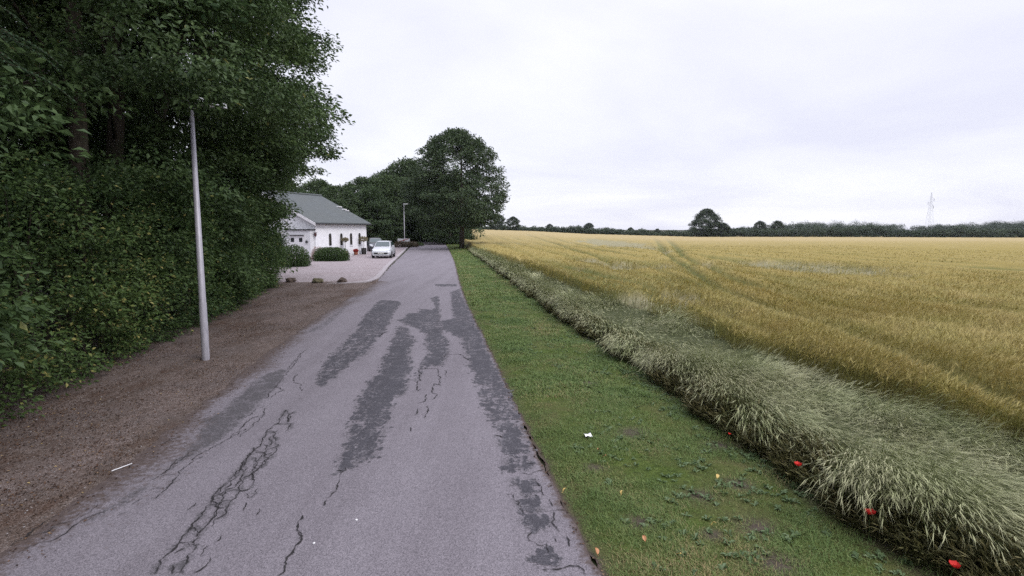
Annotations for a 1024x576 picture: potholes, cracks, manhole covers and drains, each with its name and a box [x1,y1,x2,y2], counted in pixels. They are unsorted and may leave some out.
crack [526,463,585,574]
crack [8,349,307,573]
crack [410,354,469,430]
